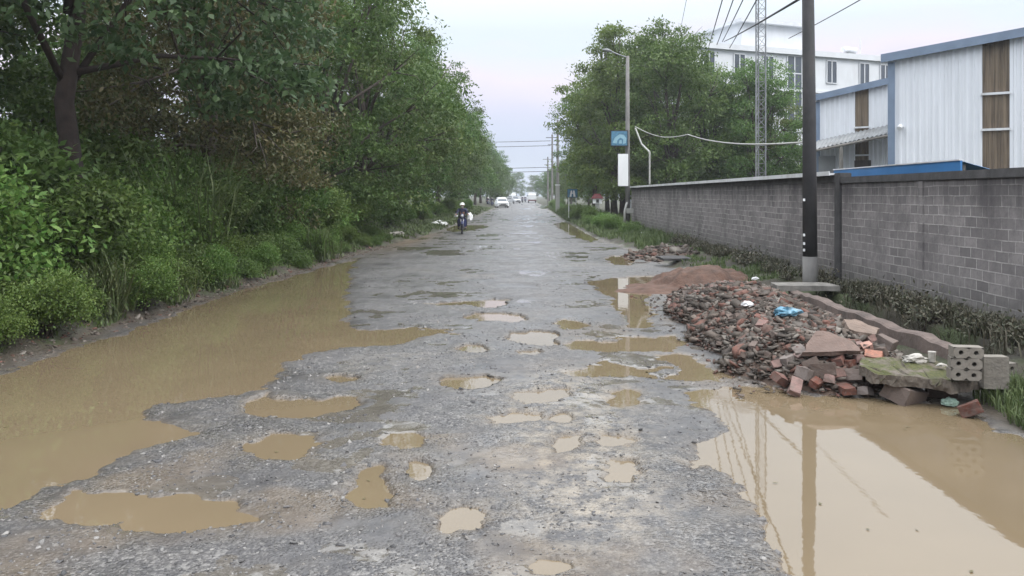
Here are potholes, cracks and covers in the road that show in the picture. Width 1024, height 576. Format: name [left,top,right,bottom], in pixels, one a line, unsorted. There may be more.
pothole [0,256,462,524]
pothole [495,372,648,406]
pothole [518,551,587,576]
pothole [654,379,1024,576]
pothole [470,405,550,426]
pothole [554,360,653,381]
pothole [526,425,593,457]
pothole [430,371,507,390]
pothole [461,310,531,323]
pothole [422,496,511,538]
pothole [587,382,656,411]
